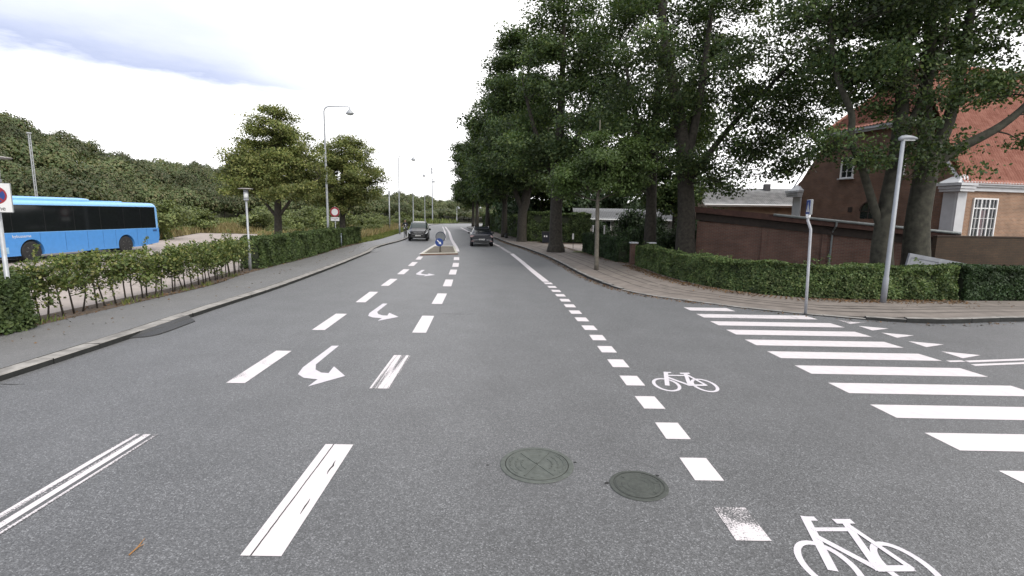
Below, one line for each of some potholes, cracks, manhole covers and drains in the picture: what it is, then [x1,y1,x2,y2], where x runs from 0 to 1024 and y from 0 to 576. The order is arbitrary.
manhole cover [609,470,669,501]
manhole cover [500,447,574,484]
